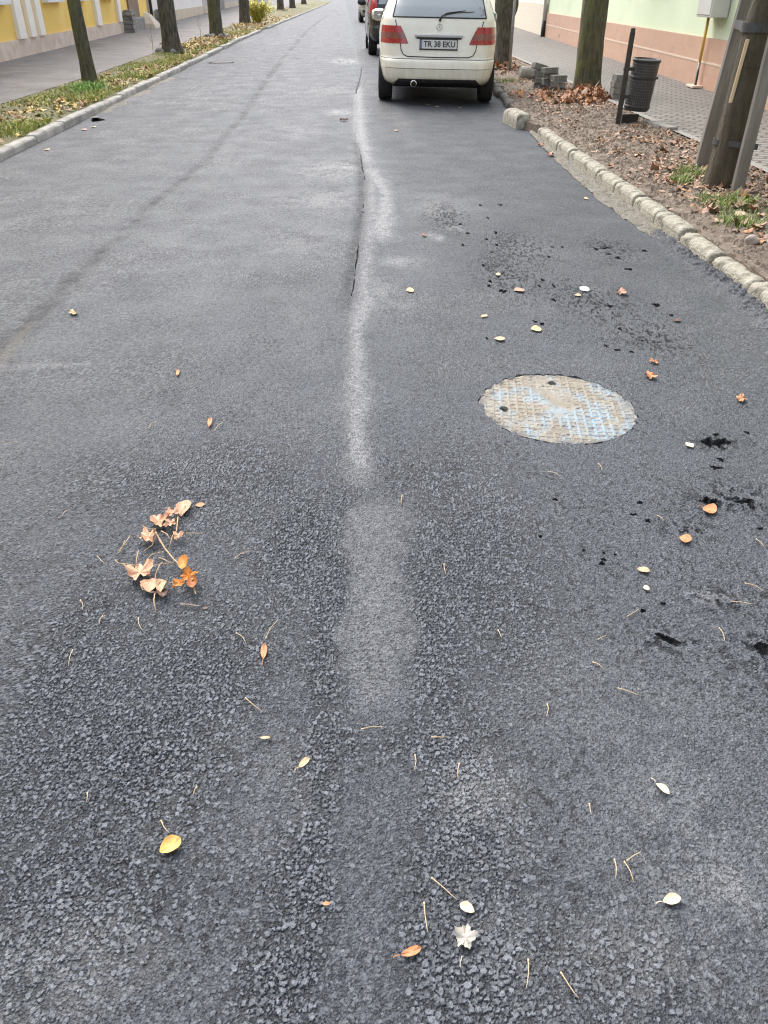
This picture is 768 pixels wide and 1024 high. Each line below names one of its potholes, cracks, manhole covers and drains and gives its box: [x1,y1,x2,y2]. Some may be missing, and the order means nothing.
pothole [751,642,768,655]
manhole cover [478,375,638,444]
pothole [655,633,681,646]
pothole [699,496,719,506]
pothole [699,436,732,450]
